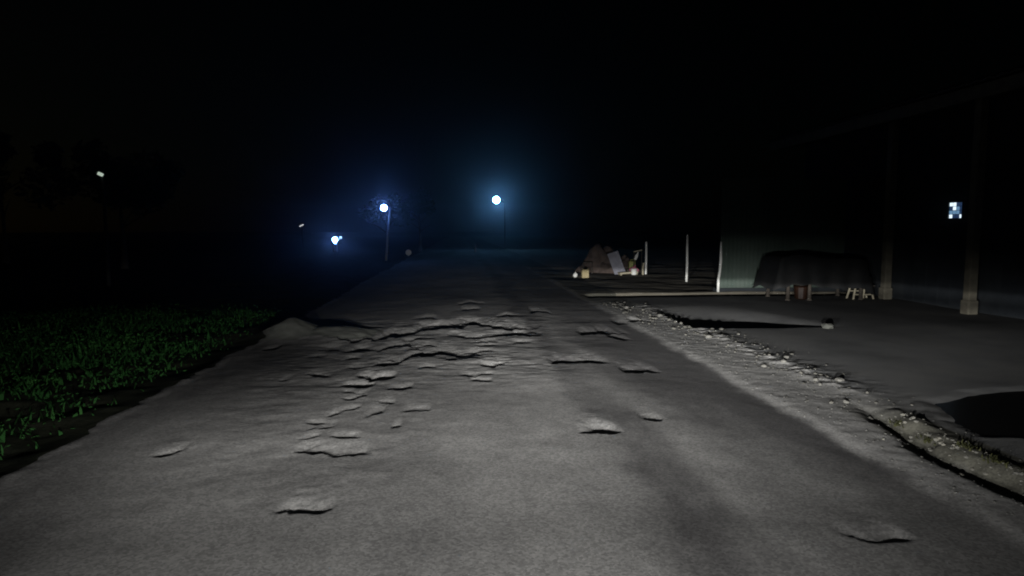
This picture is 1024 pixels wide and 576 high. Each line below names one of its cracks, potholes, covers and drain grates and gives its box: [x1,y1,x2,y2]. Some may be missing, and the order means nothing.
pothole [546,351,607,364]
pothole [576,417,622,434]
crack [310,315,542,370]
pothole [652,307,839,329]
pothole [632,407,663,421]
pothole [293,434,372,457]
pothole [153,439,197,457]
pothole [614,361,656,374]
pothole [274,492,340,515]
pothole [824,518,915,544]
